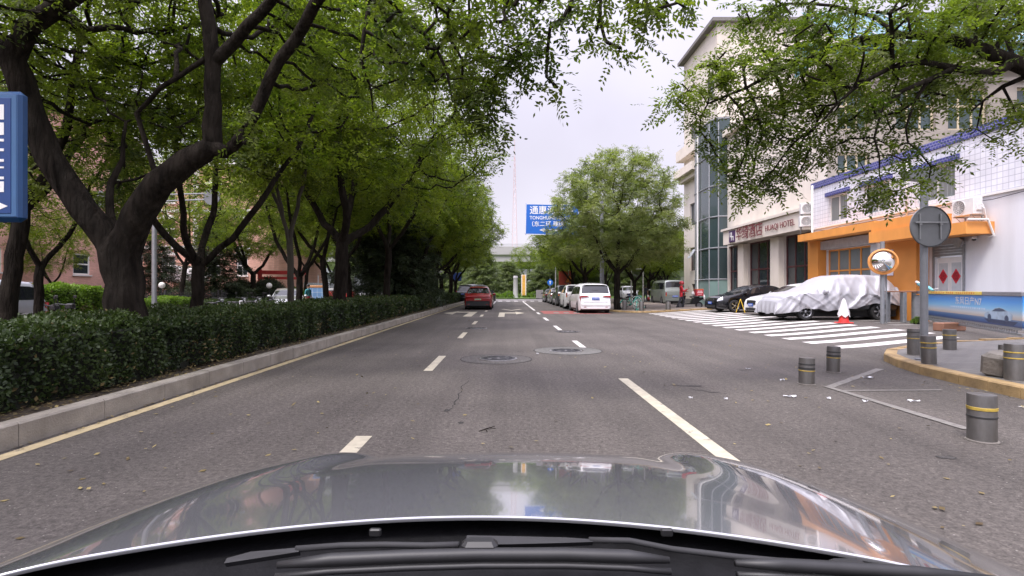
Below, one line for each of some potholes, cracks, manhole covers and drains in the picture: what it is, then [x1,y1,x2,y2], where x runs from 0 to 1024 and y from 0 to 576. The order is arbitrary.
manhole cover [533,347,602,355]
manhole cover [460,354,532,364]
